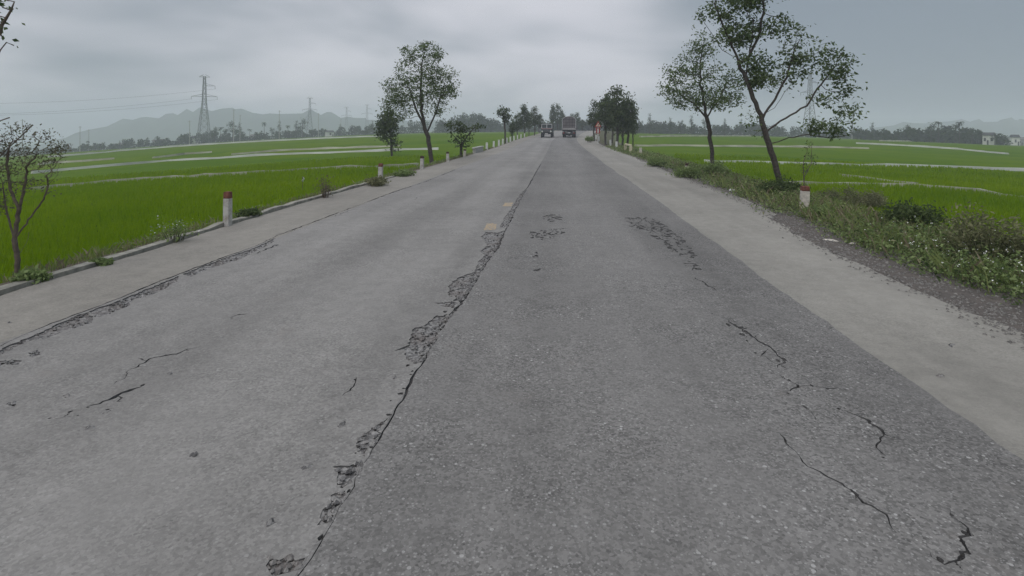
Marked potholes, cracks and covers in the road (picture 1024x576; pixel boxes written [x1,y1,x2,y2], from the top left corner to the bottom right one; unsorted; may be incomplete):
crack [1,166,464,346]
crack [529,214,565,271]
crack [930,505,974,570]
crack [626,217,716,290]
crack [711,313,842,421]
crack [48,347,198,419]
crack [780,408,896,532]
